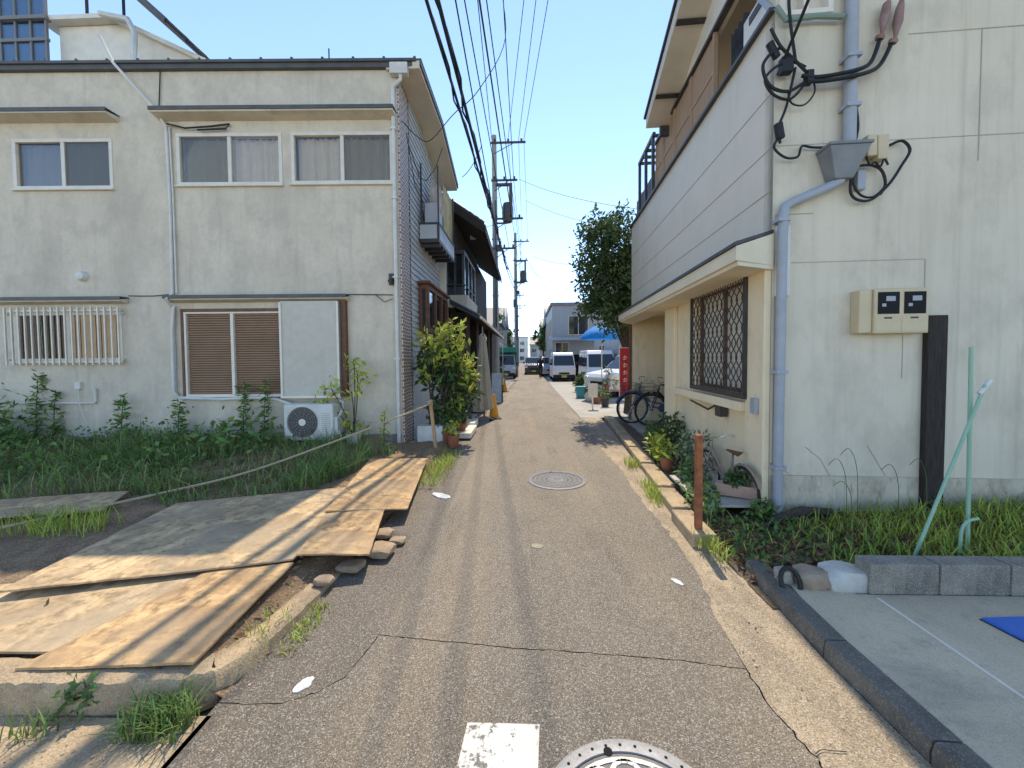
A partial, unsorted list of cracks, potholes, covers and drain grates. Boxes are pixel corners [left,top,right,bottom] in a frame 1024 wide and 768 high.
manhole cover [528,471,587,490]
crack [232,635,745,705]
manhole cover [555,739,692,768]
